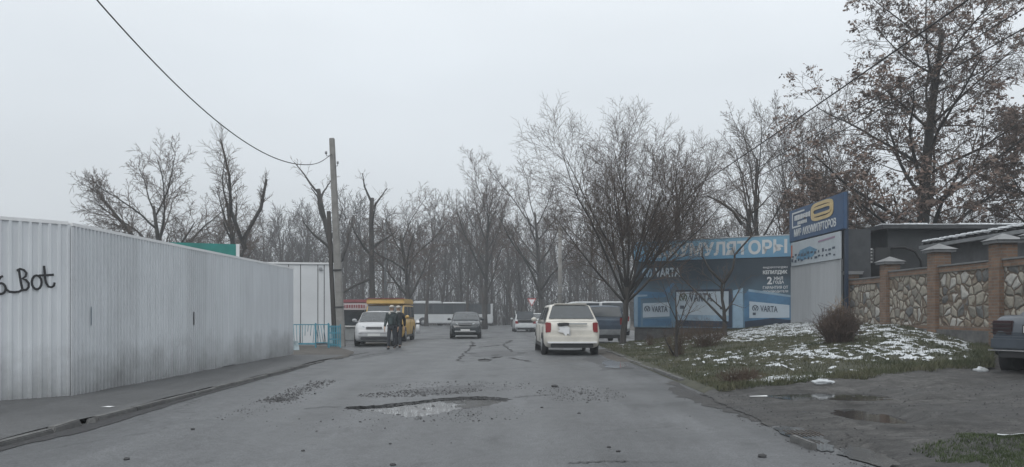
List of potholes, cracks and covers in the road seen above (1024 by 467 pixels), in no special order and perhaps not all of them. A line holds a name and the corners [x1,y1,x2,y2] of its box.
drain grate [783,429,824,437]
pothole [343,396,511,417]
crack [450,338,529,361]
